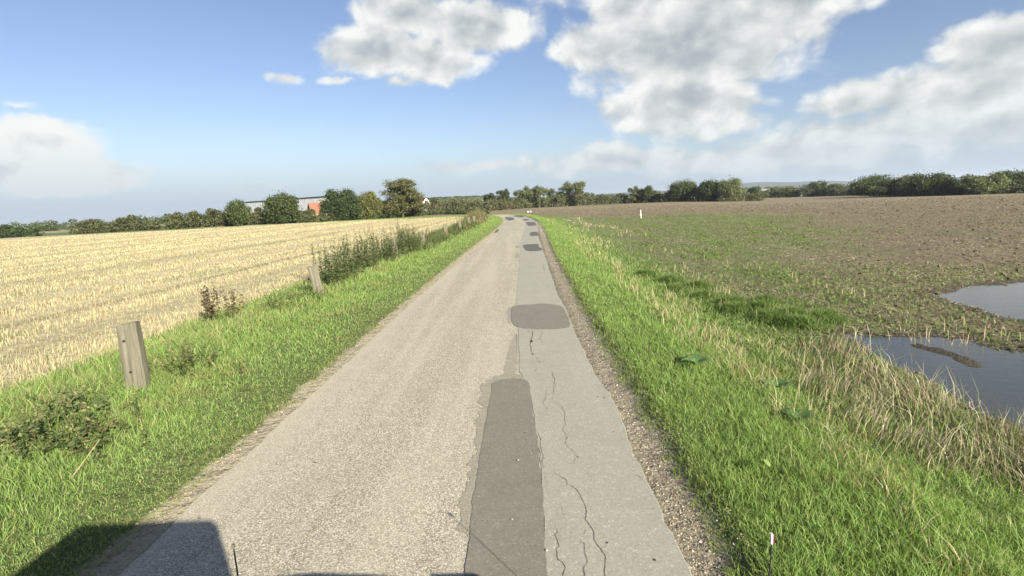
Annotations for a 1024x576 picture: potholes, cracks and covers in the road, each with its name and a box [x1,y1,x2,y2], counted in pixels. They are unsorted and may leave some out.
crack [537,430,606,574]
